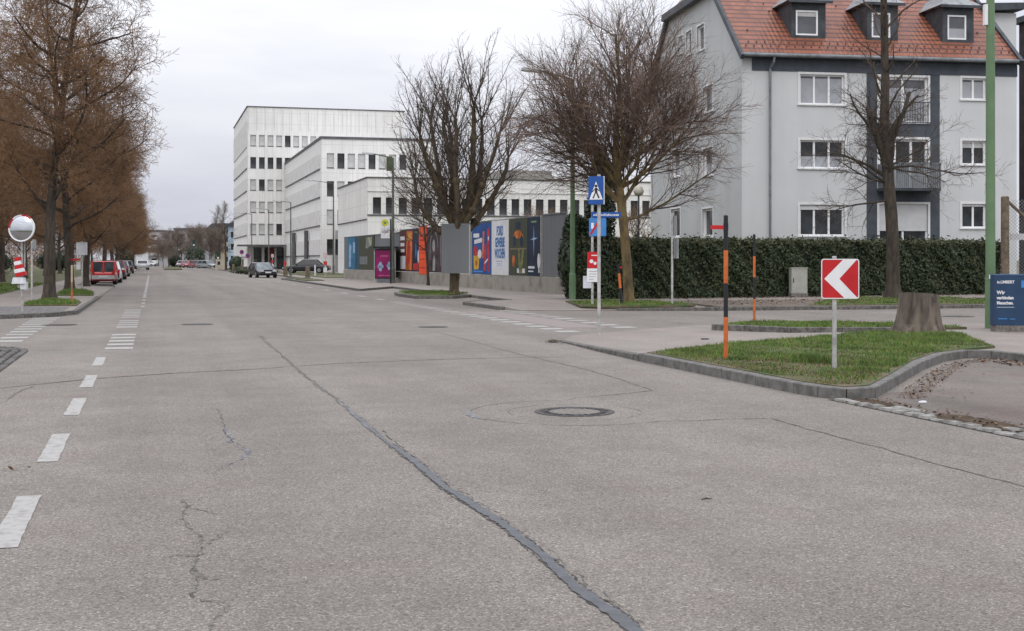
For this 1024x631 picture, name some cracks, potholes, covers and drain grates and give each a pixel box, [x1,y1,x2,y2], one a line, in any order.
crack [159,498,230,631]
manhole cover [535,407,615,417]
crack [211,407,252,474]
